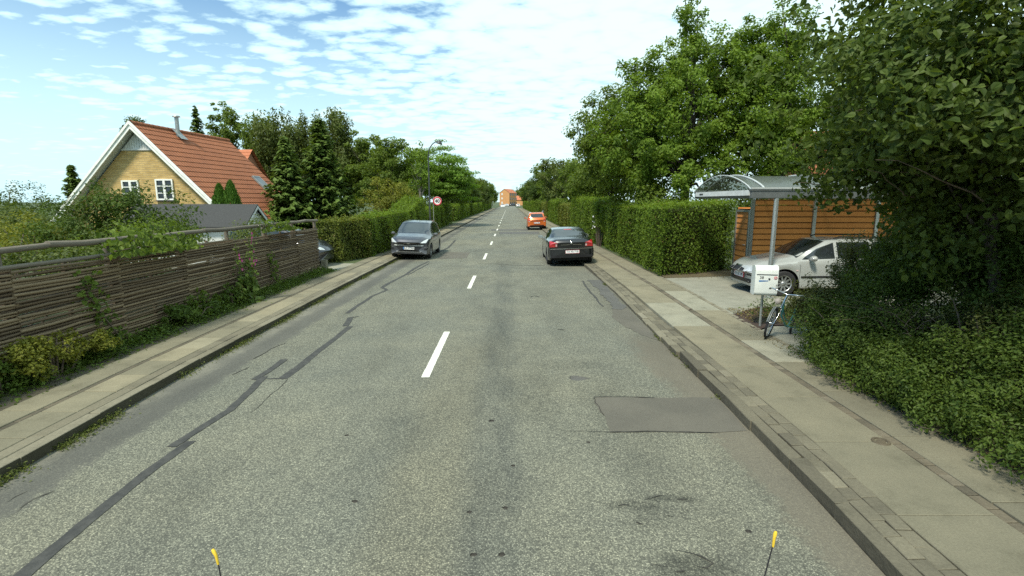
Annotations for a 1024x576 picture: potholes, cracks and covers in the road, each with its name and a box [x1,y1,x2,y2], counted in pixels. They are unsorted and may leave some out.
crack [232,326,353,409]
crack [653,550,713,572]
manhole cover [871,437,891,446]
